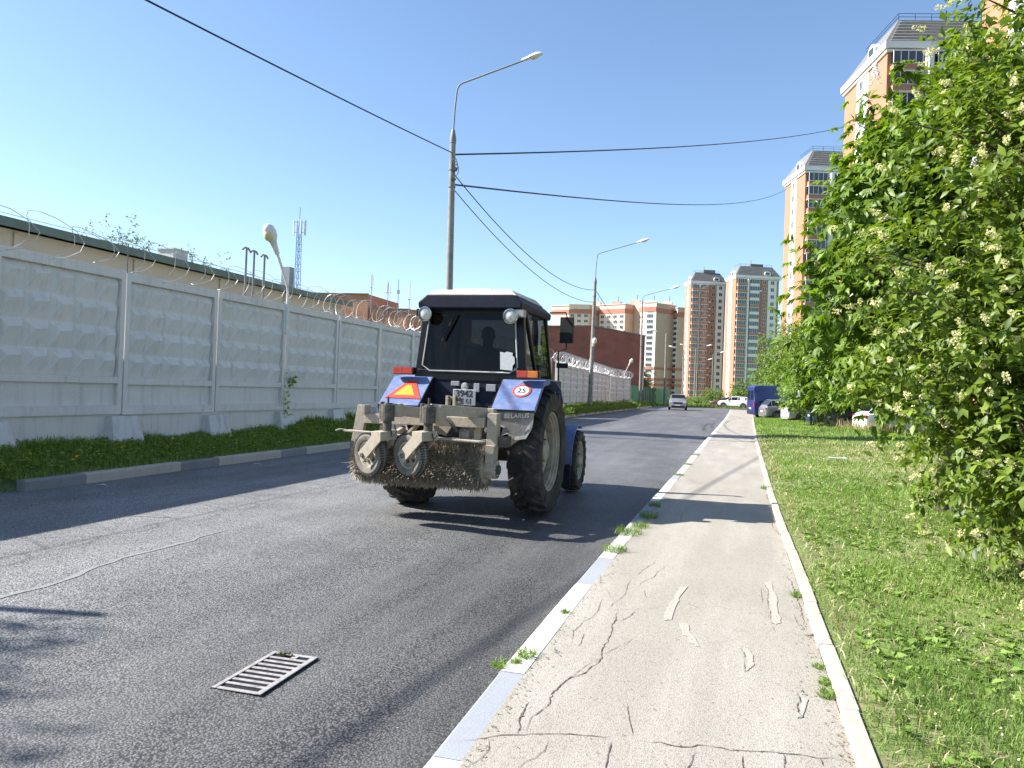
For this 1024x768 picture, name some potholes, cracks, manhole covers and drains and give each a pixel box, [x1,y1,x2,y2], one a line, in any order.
pothole [796,692,809,719]
pothole [663,586,688,620]
pothole [742,647,754,672]
drain grate [211,651,319,696]
pothole [763,582,781,624]
crack [467,562,657,768]
pothole [679,622,700,647]
